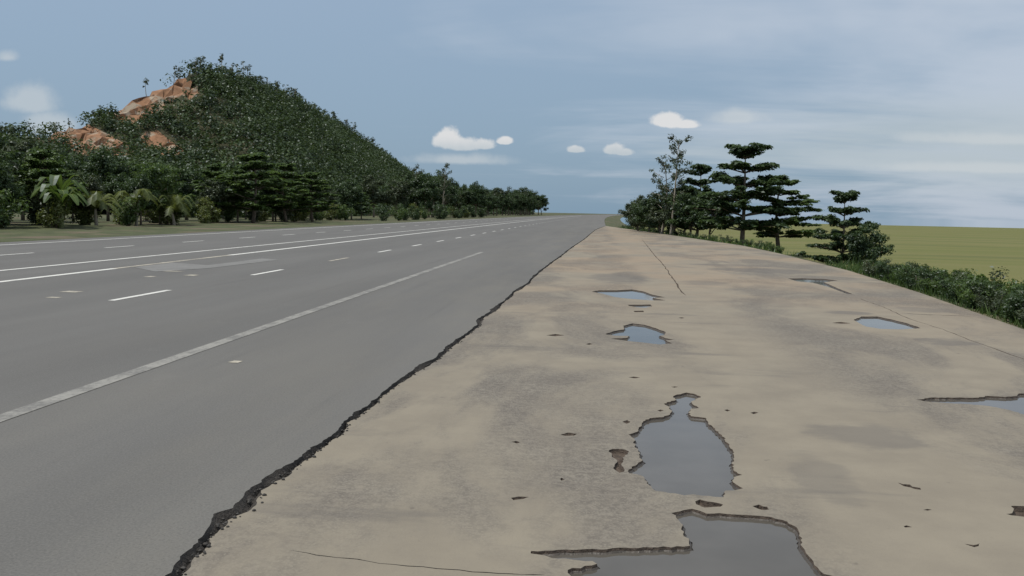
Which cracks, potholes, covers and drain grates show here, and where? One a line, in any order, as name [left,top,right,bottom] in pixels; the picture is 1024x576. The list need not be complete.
pothole [592,290,661,300]
pothole [531,509,831,576]
pothole [628,392,742,497]
pothole [788,278,851,294]
pothole [609,449,629,473]
pothole [854,317,919,329]
pothole [606,323,673,344]
pothole [919,393,1024,414]
